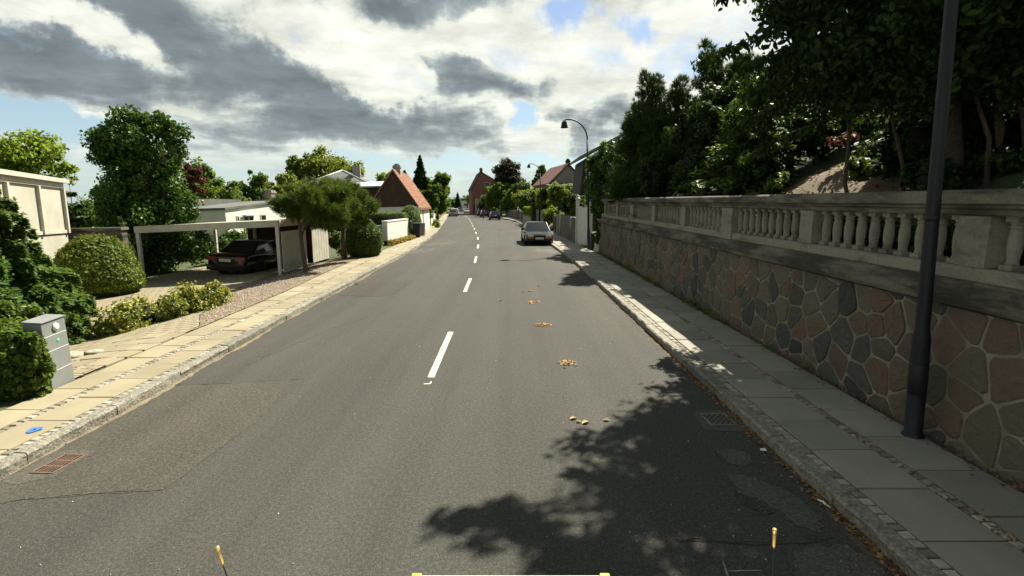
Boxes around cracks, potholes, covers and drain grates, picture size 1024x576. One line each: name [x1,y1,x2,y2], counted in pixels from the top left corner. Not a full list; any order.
drain grate [29,453,87,474]
drain grate [700,413,738,426]
